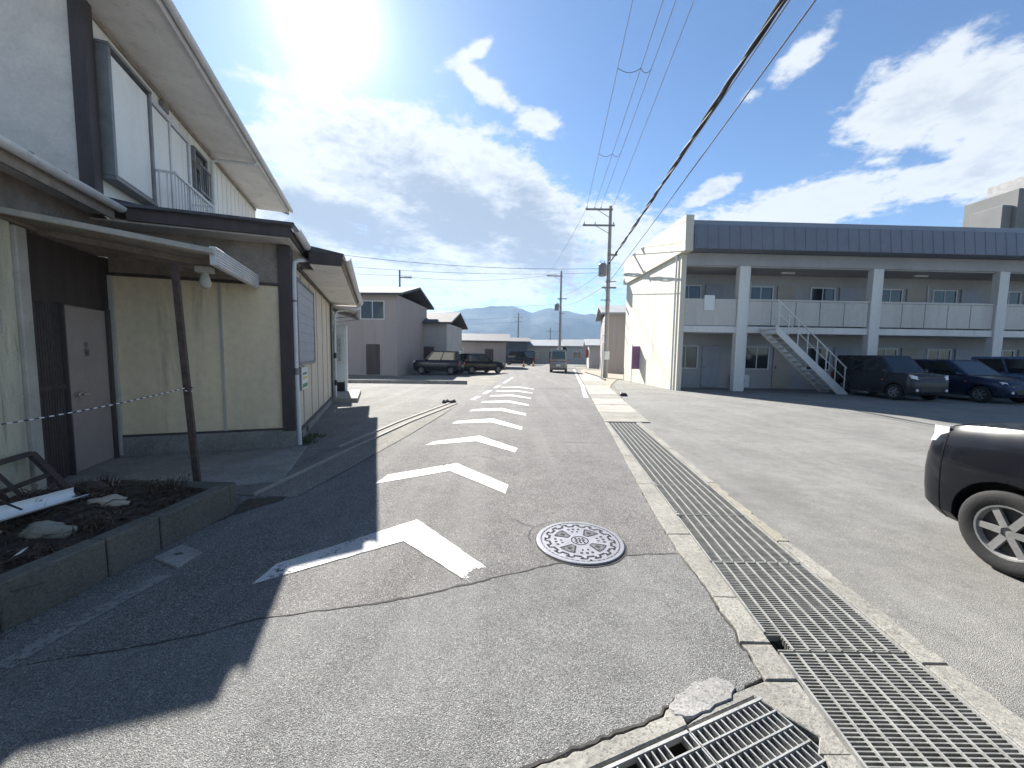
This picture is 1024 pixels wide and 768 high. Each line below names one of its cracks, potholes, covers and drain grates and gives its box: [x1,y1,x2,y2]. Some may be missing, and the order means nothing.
drain grate [628,450,686,465]
drain grate [602,730,719,768]
drain grate [688,696,826,768]
manhole cover [535,522,627,567]
drain grate [676,514,800,563]
drain grate [655,485,745,516]
crack [521,559,761,768]
drain grate [614,430,655,439]
drain grate [639,464,710,486]
drain grate [712,561,906,655]
drain grate [620,438,668,450]
drain grate [608,422,644,430]
